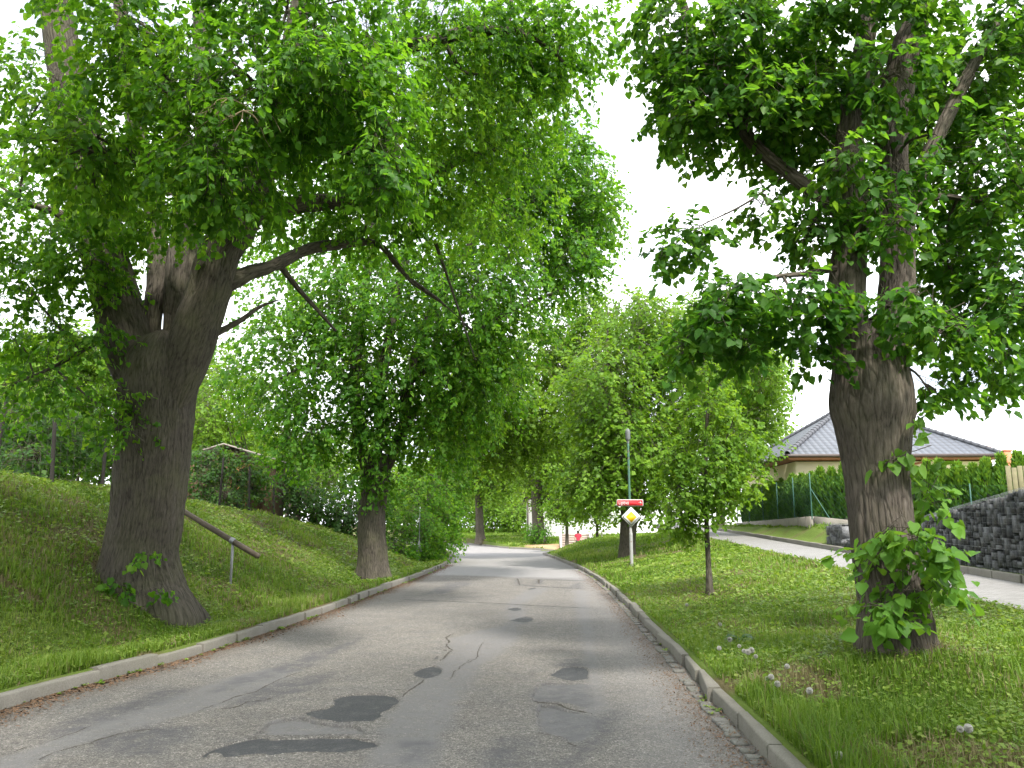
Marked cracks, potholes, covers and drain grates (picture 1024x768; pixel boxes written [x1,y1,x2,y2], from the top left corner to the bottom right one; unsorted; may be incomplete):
crack [439,633,484,679]
crack [530,698,592,714]
crack [397,680,425,696]
